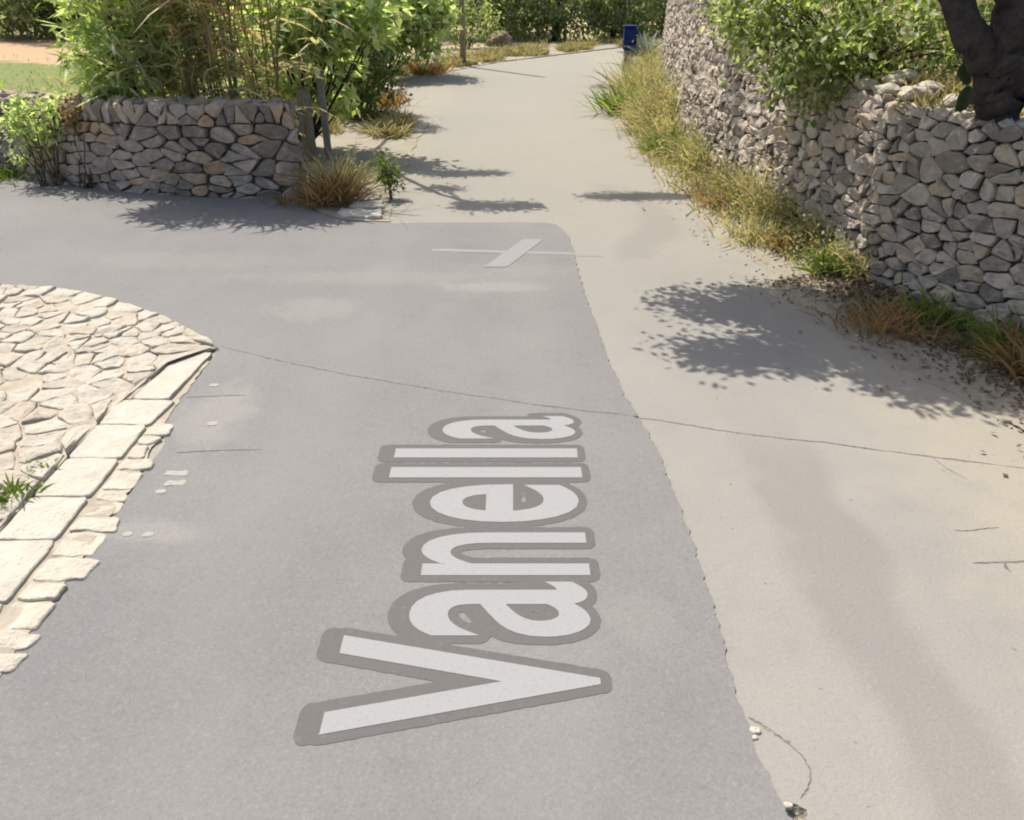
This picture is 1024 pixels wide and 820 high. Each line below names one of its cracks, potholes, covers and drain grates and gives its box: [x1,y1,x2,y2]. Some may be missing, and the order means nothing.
crack [225,347,1024,478]
crack [976,561,1024,572]
crack [749,717,813,799]
